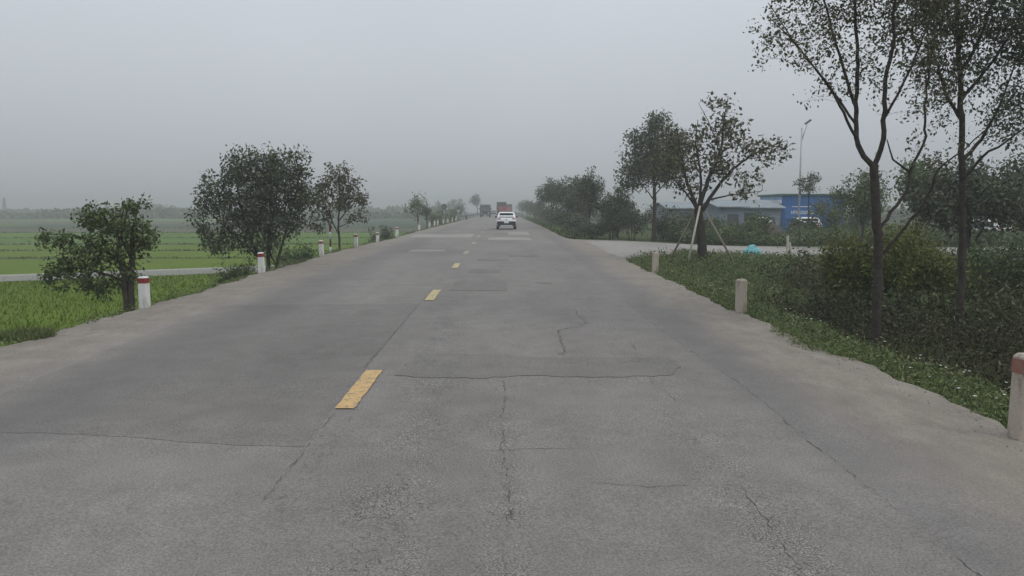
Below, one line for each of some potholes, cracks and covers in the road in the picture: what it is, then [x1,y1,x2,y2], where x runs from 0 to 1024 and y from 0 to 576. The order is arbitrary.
crack [481,382,575,576]
crack [702,458,822,576]
